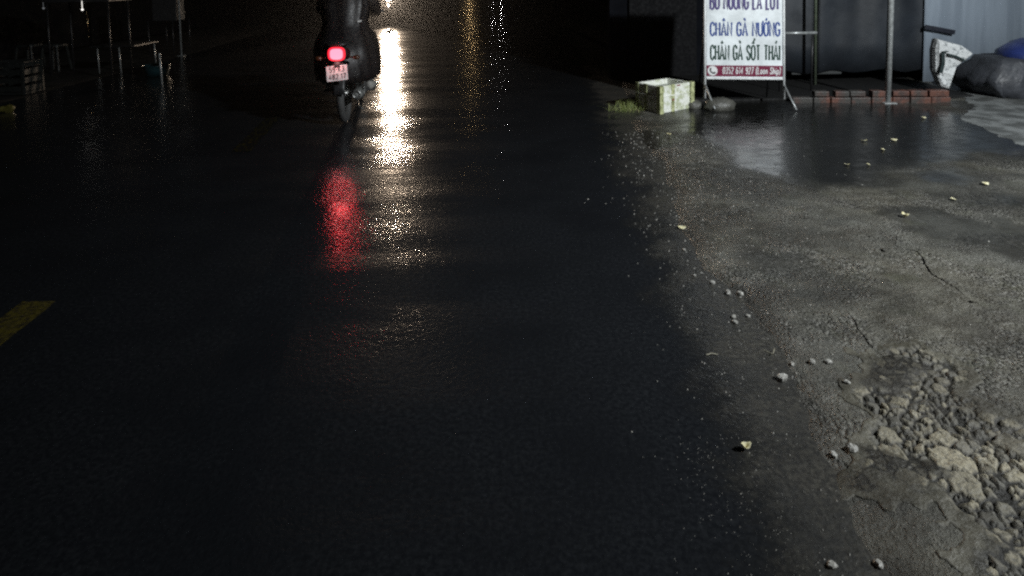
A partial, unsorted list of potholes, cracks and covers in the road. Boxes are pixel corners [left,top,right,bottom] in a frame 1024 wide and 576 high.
crack [837,234,1024,576]
